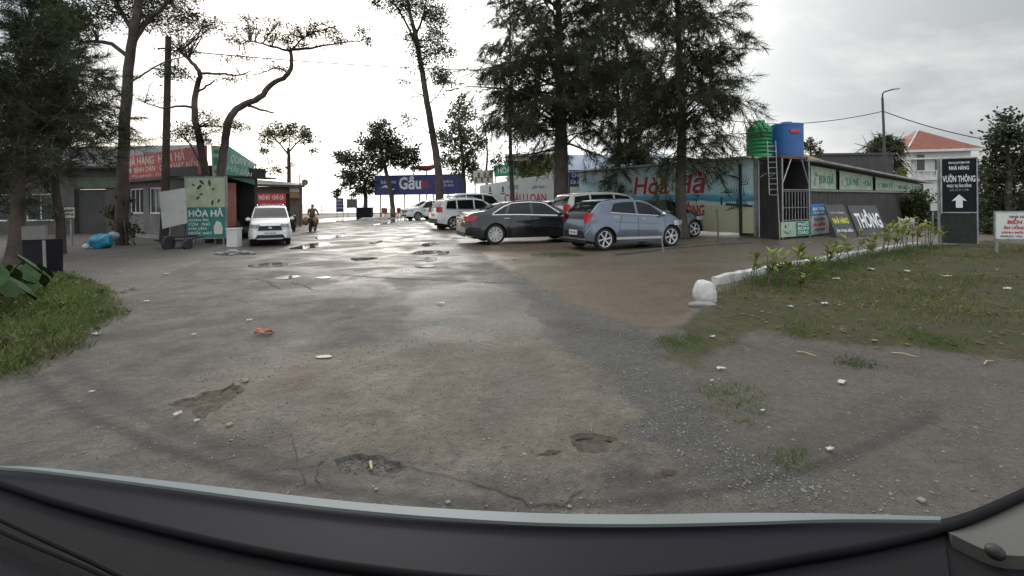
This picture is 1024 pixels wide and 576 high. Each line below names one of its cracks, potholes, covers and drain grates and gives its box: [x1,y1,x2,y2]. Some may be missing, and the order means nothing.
pothole [569,433,618,454]
pothole [537,449,562,457]
pothole [653,469,679,482]
pothole [334,453,408,479]
pothole [167,384,245,420]
crack [408,466,582,506]
crack [275,440,327,486]
